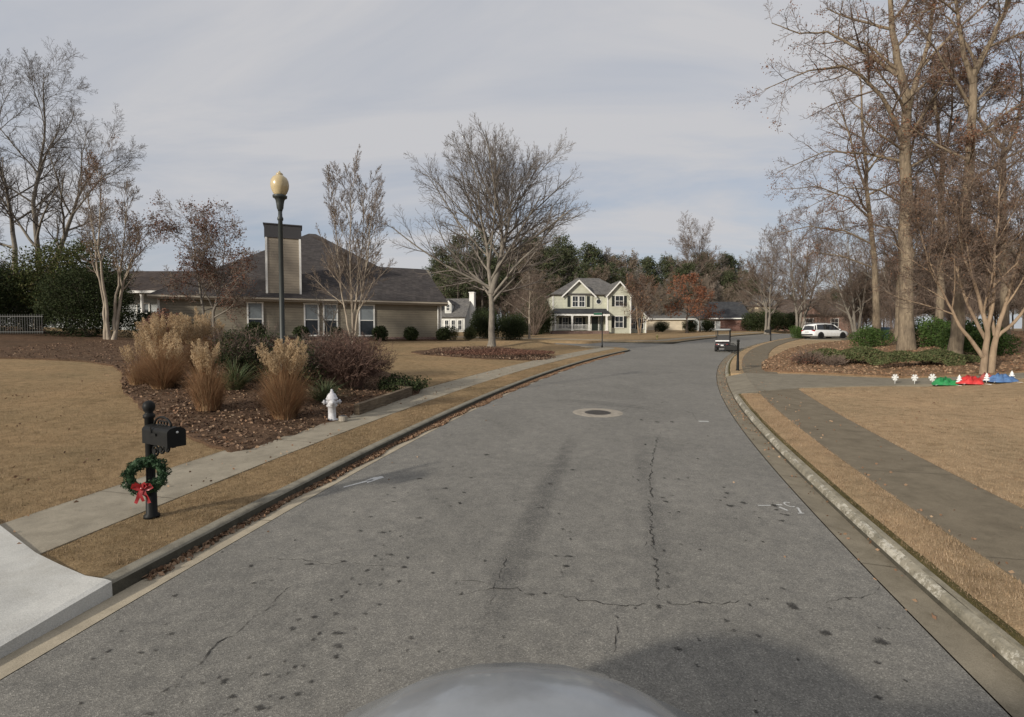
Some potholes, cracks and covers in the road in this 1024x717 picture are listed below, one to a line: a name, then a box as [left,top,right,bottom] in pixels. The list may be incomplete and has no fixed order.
crack [162,585,292,692]
crack [463,561,753,606]
crack [645,439,659,607]
manhole cover [573,408,623,417]
